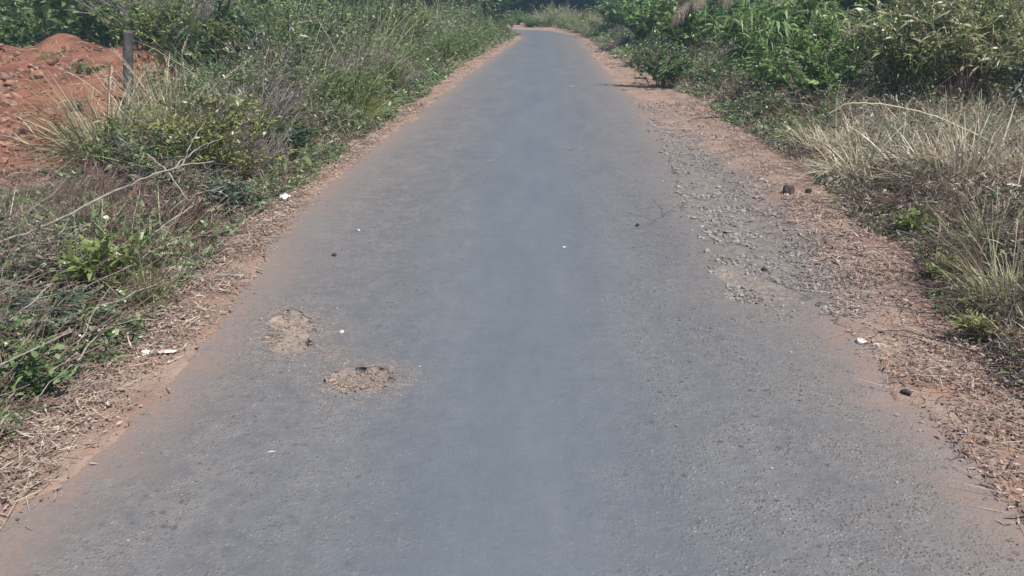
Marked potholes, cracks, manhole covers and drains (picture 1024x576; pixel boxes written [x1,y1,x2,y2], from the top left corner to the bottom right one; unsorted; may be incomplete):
pothole [261,309,316,355]
pothole [323,366,396,394]
